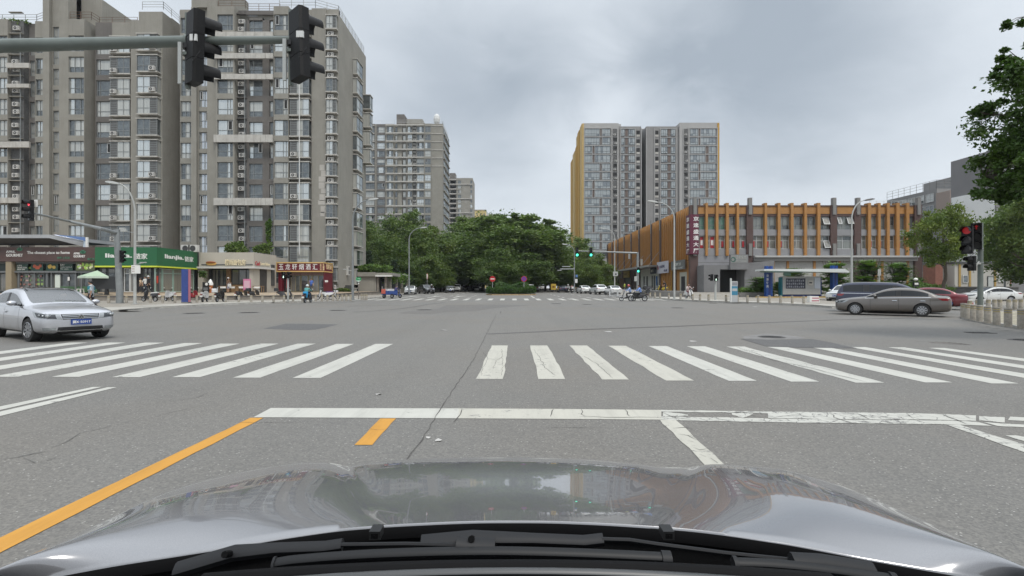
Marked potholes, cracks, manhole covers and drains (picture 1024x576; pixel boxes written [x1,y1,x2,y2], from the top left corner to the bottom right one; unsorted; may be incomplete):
crack [2,394,204,462]
crack [406,312,503,460]
